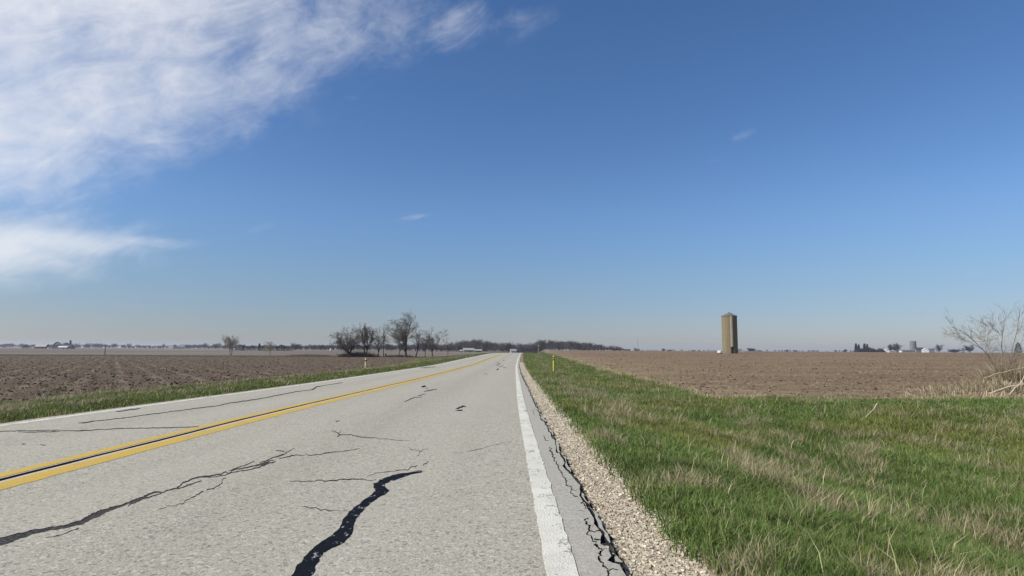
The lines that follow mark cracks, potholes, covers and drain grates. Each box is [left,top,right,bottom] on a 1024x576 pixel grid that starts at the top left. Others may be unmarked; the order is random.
crack [520,369,630,576]
crack [0,382,429,546]
